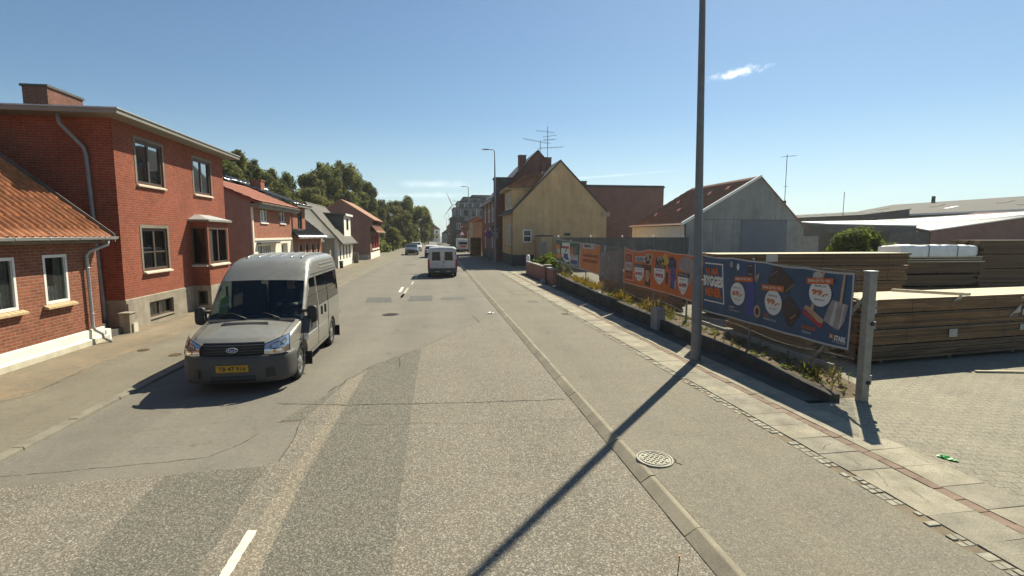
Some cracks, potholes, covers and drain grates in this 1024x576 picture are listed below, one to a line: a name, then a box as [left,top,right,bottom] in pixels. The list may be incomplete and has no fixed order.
crack [280,399,571,458]
manhole cover [636,450,674,468]
